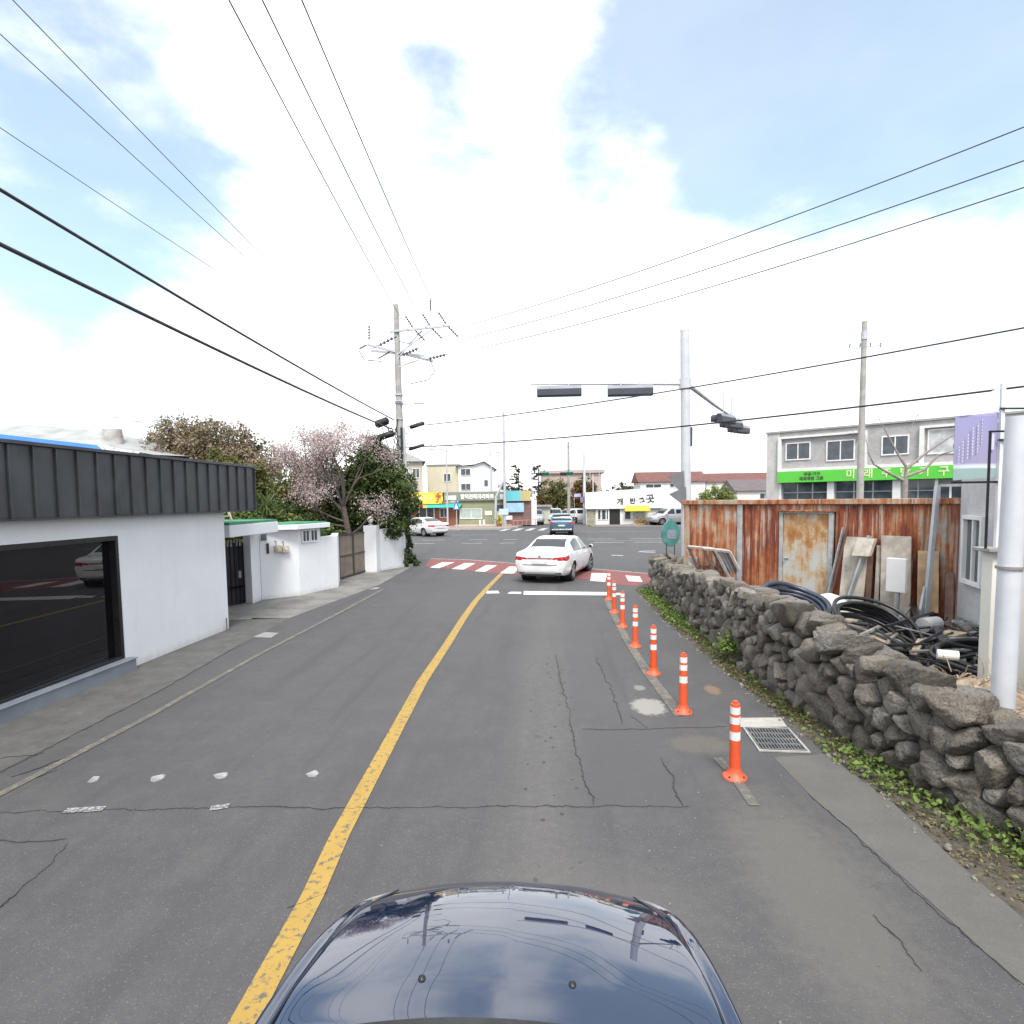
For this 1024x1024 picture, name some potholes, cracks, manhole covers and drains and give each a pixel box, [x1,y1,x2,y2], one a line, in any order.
crack [555,656,595,805]
crack [873,914,922,971]
crack [0,838,67,907]
crack [596,658,727,730]
drain grate [742,726,811,753]
